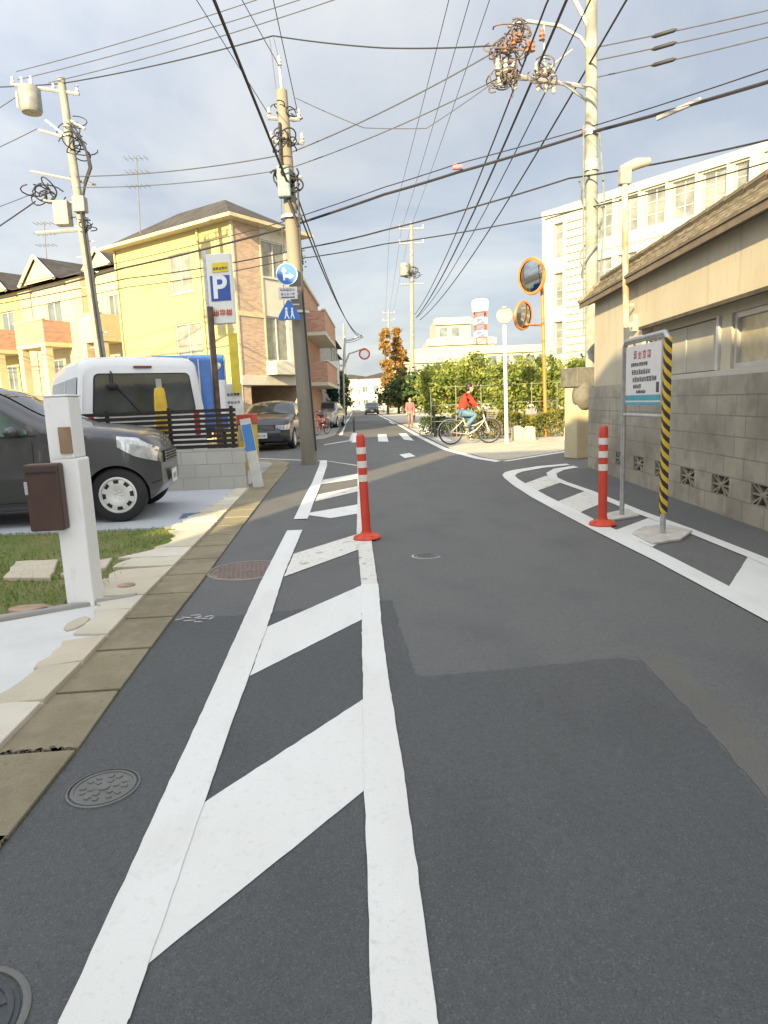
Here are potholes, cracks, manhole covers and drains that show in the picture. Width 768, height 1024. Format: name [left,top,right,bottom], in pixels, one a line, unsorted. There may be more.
manhole cover [0,965,32,1024]
manhole cover [207,560,288,581]
manhole cover [65,768,141,809]
